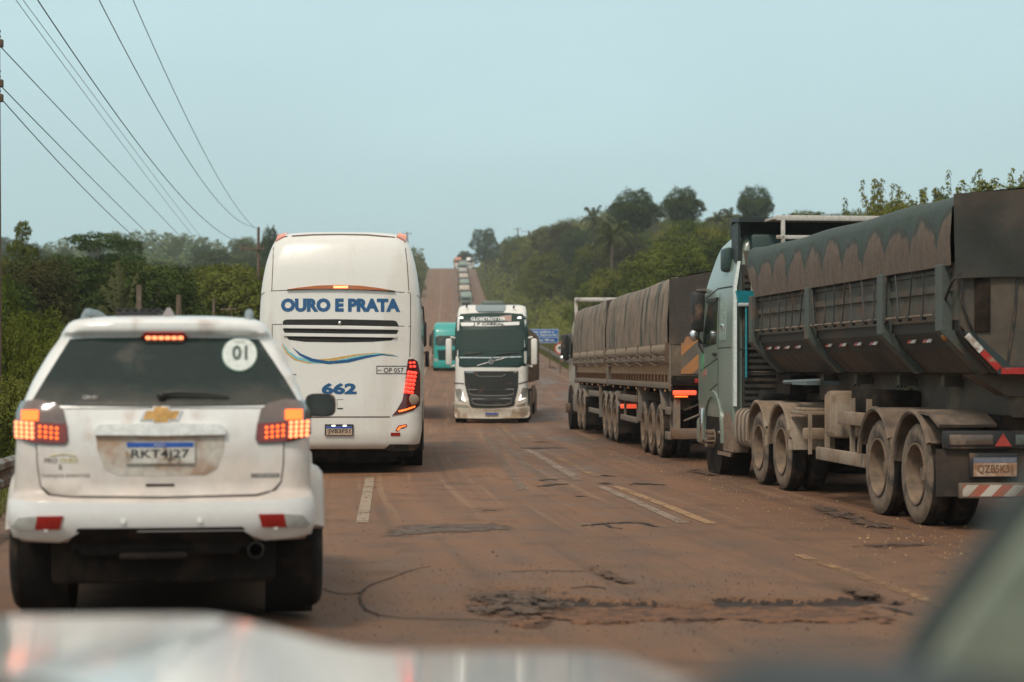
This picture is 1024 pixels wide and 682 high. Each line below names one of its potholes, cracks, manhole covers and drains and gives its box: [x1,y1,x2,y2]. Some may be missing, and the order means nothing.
pothole [504,593,905,629]
crack [325,566,521,622]
crack [601,475,667,485]
pothole [842,585,903,606]
pothole [464,587,575,621]
